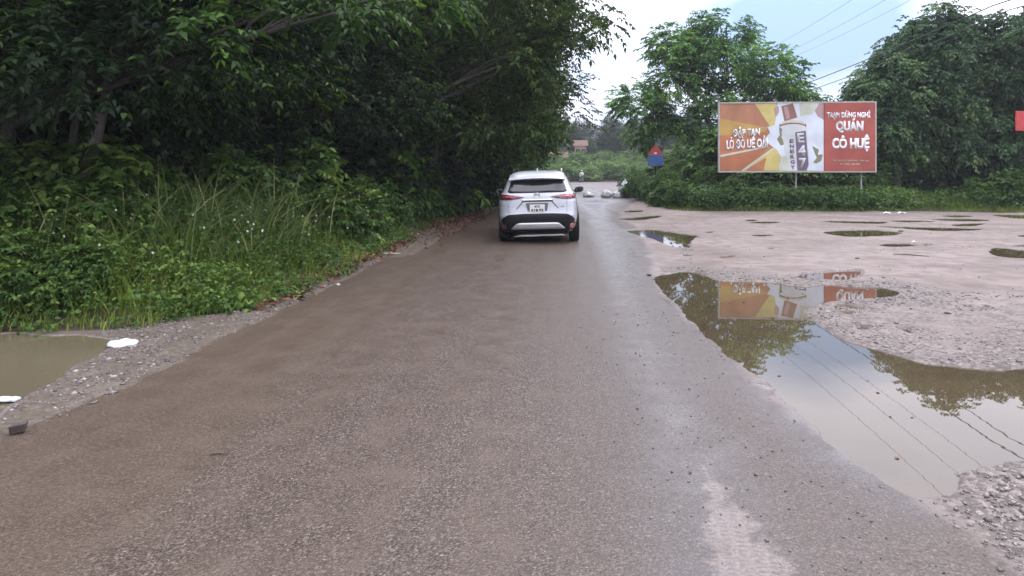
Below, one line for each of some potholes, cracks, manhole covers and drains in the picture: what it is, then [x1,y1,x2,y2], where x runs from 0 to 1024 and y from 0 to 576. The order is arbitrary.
pothole [627,229,701,257]
pothole [987,244,1024,258]
pothole [653,269,1024,499]
